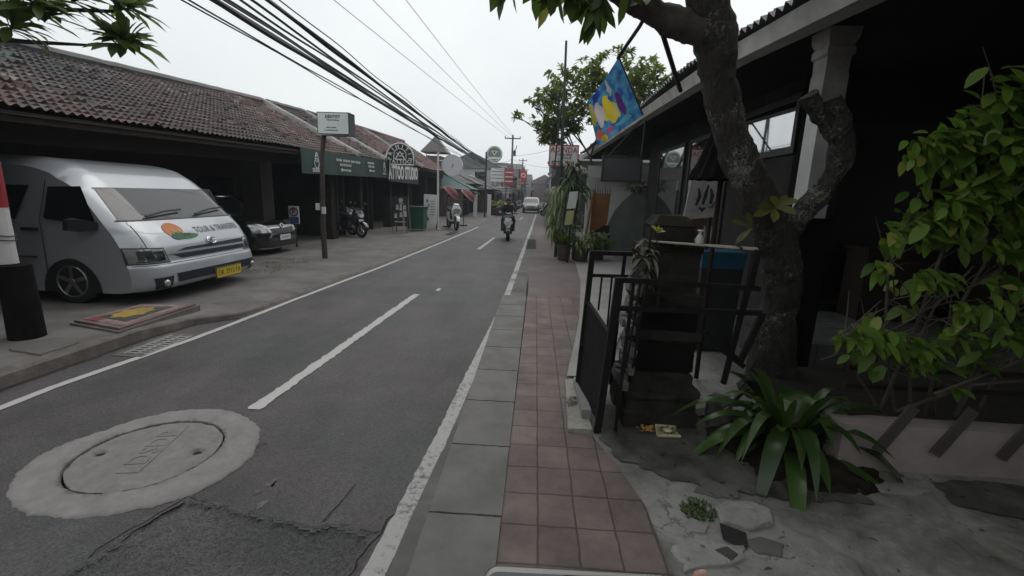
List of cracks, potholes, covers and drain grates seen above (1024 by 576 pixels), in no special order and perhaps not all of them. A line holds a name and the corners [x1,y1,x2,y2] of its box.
manhole cover [6,409,260,519]
drain grate [111,333,197,357]
crack [322,484,396,576]
